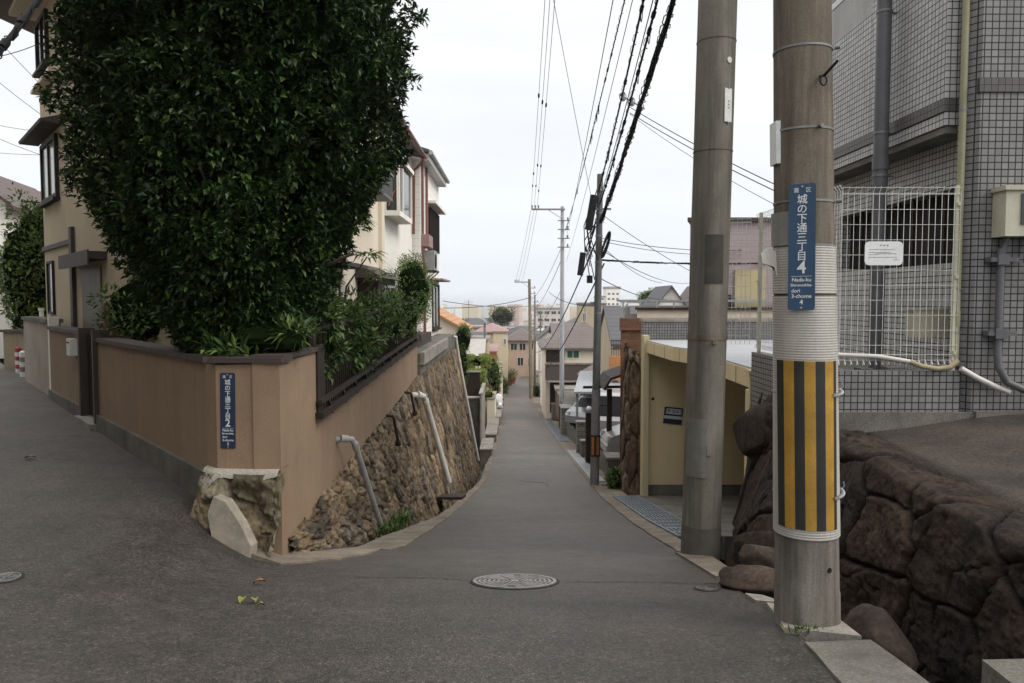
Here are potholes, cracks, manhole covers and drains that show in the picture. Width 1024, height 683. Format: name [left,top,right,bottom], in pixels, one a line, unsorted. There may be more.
manhole cover [470,574,559,590]
drain grate [651,521,682,529]
drain grate [641,515,682,523]
manhole cover [0,572,25,584]
